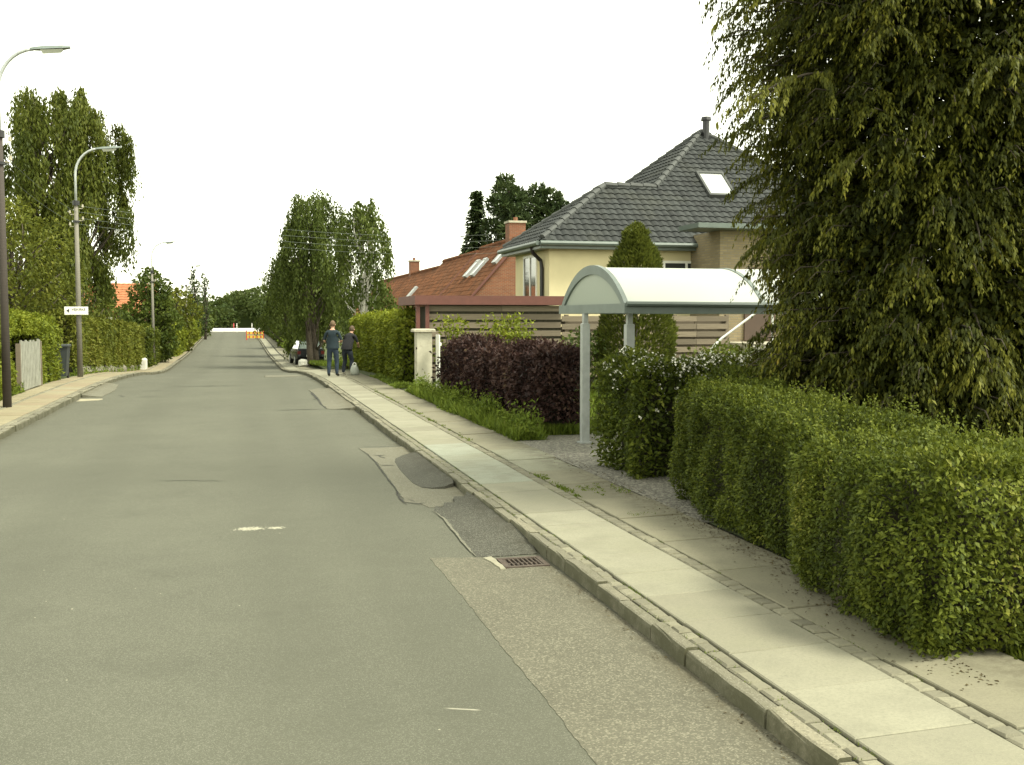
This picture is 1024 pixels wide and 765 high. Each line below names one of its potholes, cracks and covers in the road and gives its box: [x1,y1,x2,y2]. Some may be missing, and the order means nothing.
drain grate [496,556,550,569]
